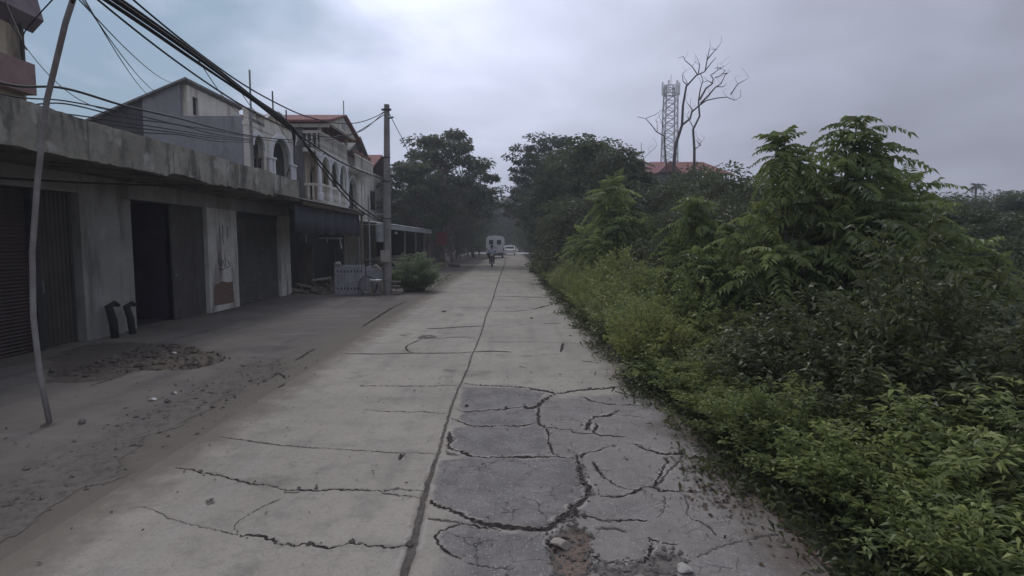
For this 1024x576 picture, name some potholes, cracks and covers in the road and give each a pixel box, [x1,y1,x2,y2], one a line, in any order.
crack [129,370,778,569]
crack [345,301,595,367]
pothole [549,527,590,576]
